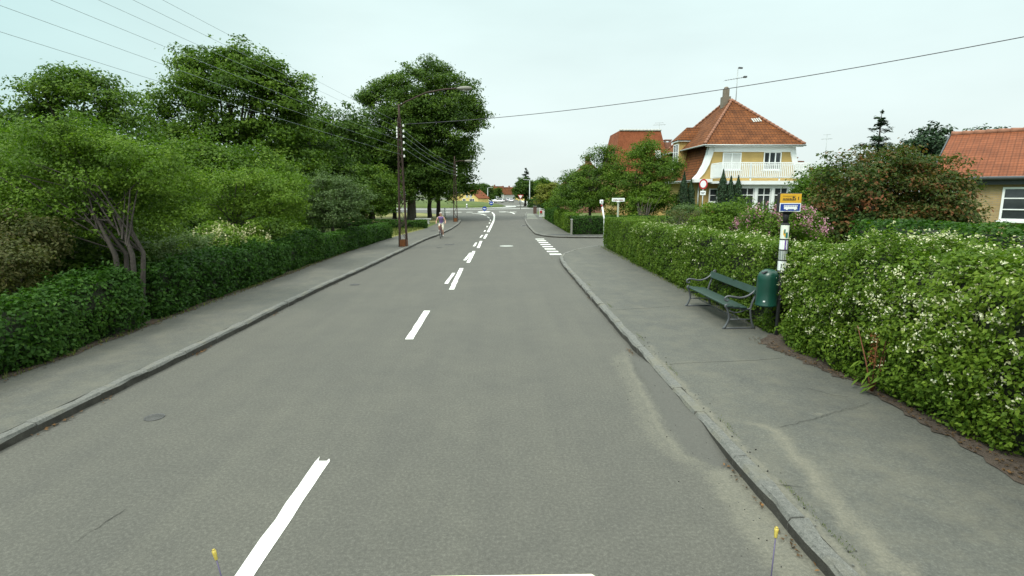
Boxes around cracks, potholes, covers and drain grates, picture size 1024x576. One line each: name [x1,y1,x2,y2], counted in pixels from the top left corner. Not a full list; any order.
manhole cover [143,413,165,421]
